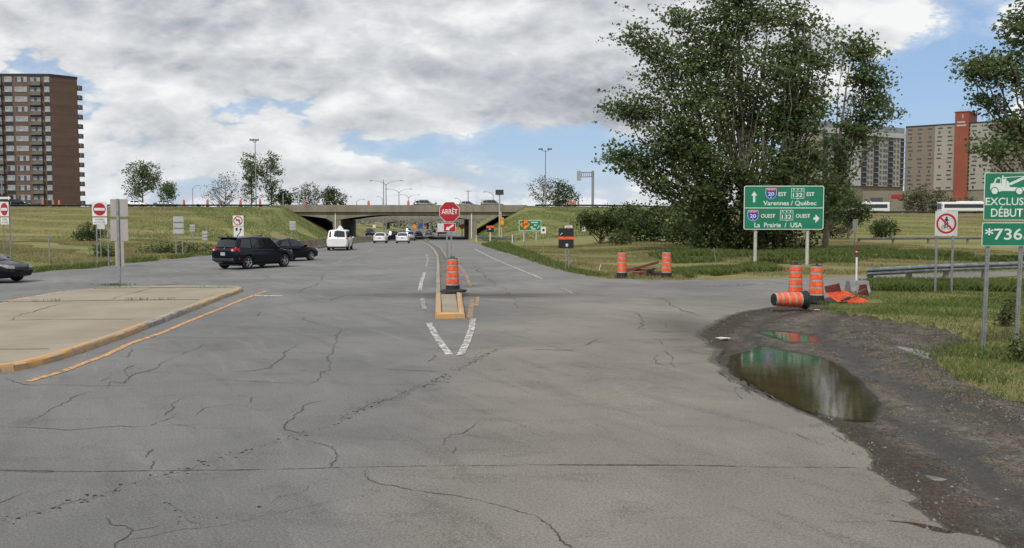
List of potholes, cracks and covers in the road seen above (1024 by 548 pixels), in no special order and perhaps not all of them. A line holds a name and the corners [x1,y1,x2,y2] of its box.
pothole [727,346,884,422]
crack [633,298,697,365]
pothole [757,331,820,344]
crack [4,317,863,548]
